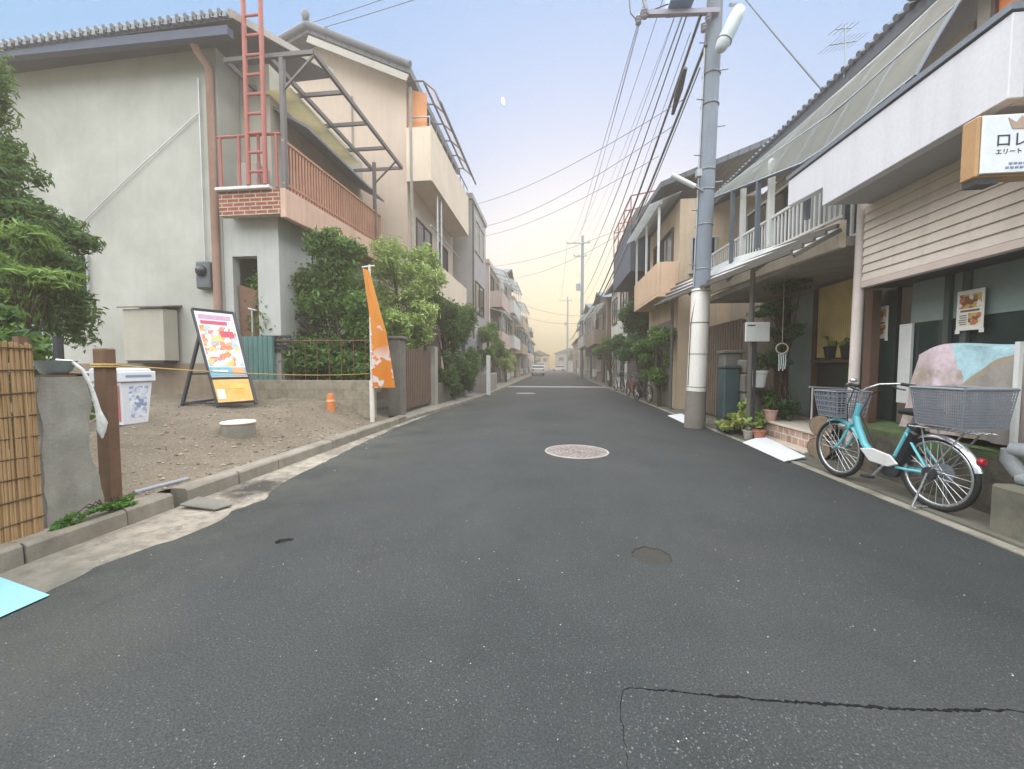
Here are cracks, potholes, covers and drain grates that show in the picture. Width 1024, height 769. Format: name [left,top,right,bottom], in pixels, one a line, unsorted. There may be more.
manhole cover [545,445,609,459]
pothole [631,546,672,565]
crack [620,687,1024,768]
